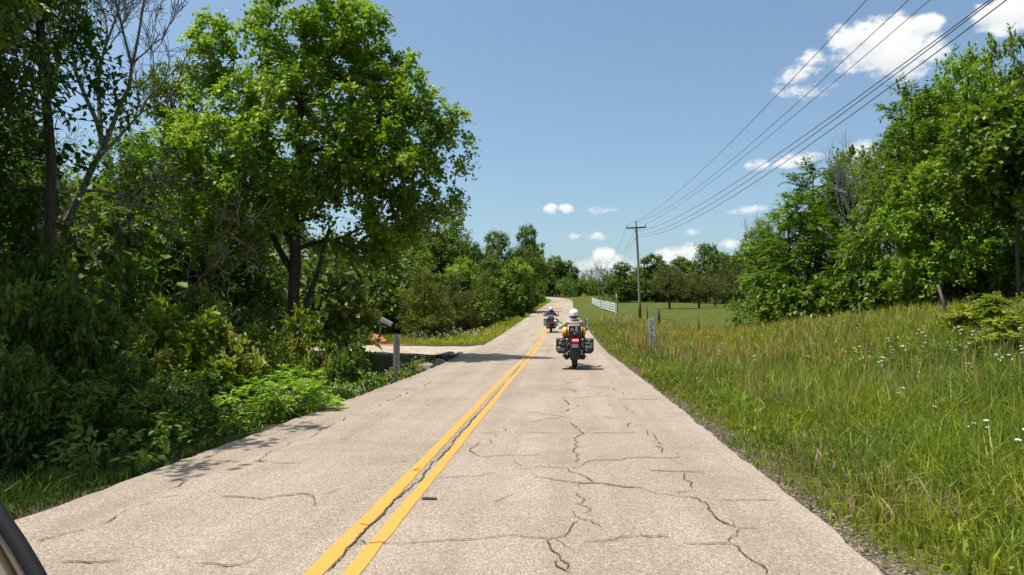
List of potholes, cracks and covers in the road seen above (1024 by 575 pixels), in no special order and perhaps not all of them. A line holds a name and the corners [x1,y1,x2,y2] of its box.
crack [219,338,767,573]
